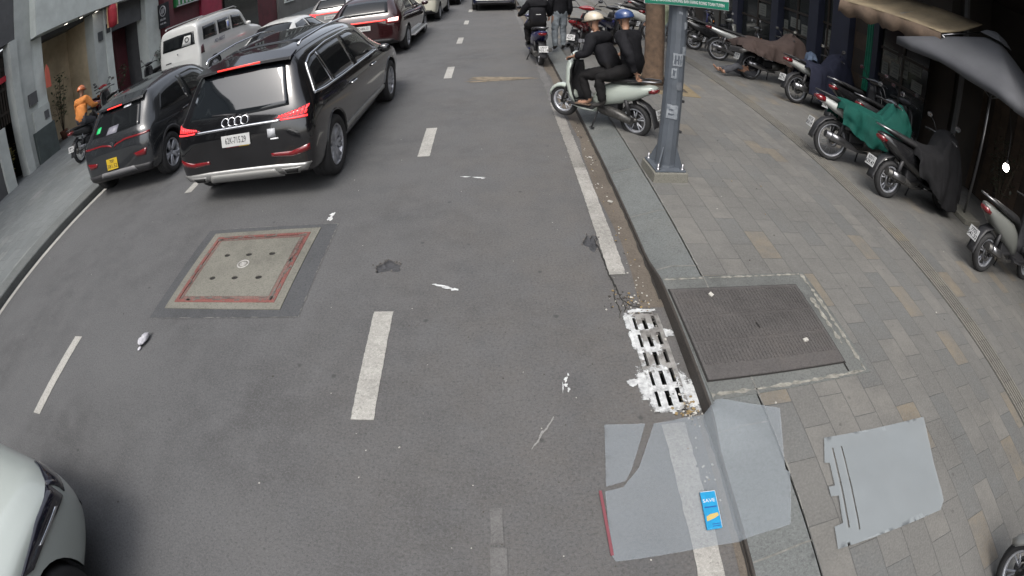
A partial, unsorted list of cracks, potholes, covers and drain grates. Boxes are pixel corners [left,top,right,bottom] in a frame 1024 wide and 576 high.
manhole cover [165,227,321,310]
pothole [372,259,401,274]
drain grate [627,311,691,414]
manhole cover [661,272,871,401]
pothole [581,233,599,253]
crack [594,238,639,317]
